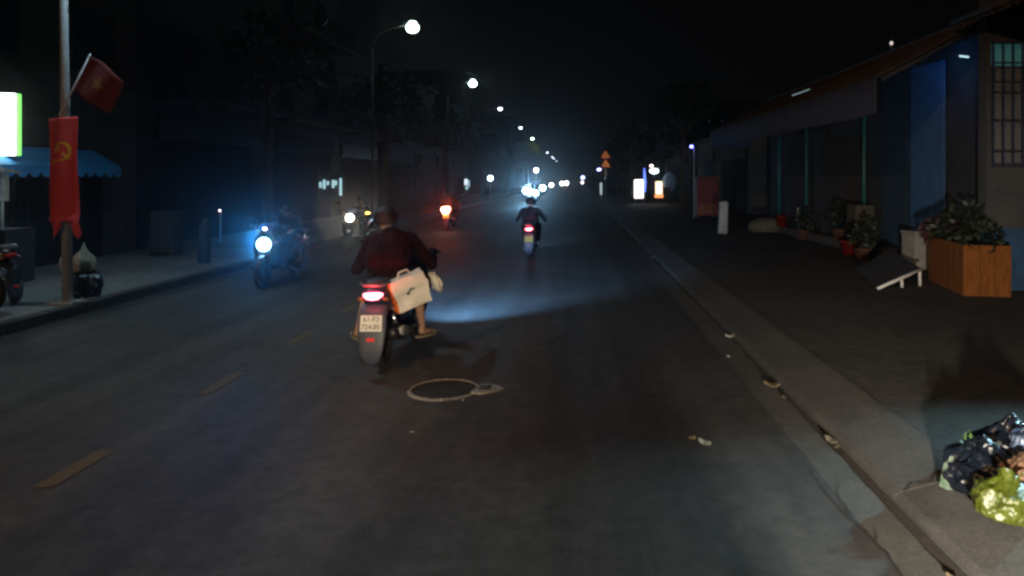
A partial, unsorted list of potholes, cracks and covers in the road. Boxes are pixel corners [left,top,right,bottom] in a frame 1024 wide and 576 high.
manhole cover [407,379,505,401]
